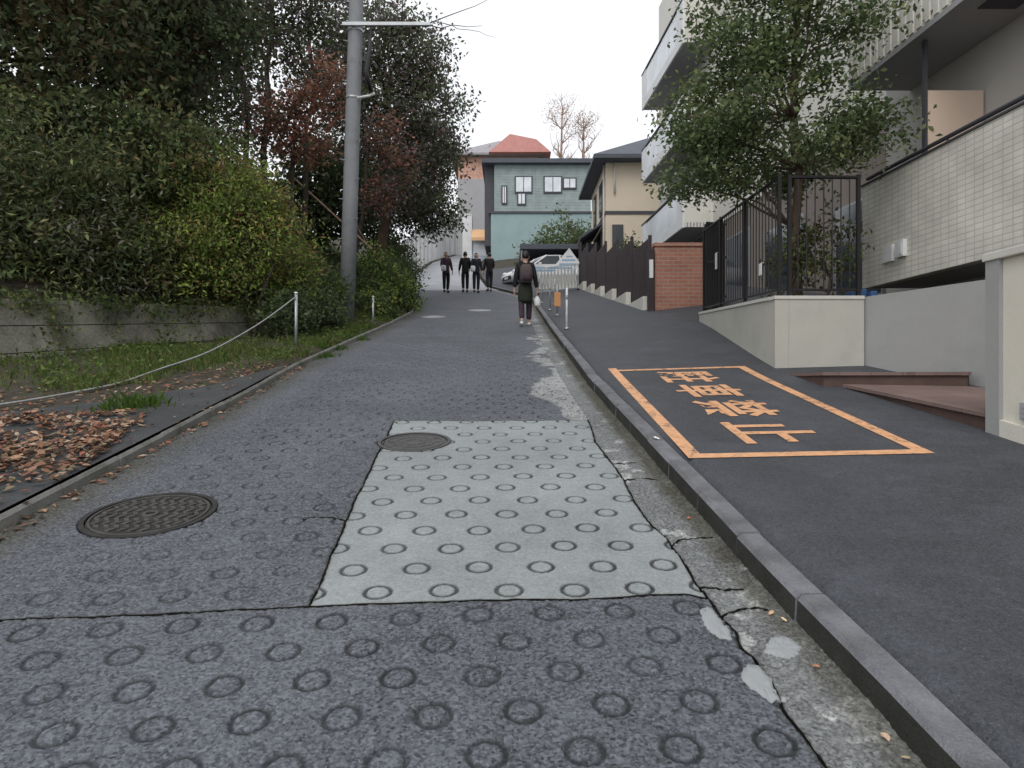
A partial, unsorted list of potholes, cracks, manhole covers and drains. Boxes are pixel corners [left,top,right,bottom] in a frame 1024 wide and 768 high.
crack [0,420,827,768]
manhole cover [378,432,451,452]
manhole cover [78,492,217,539]
